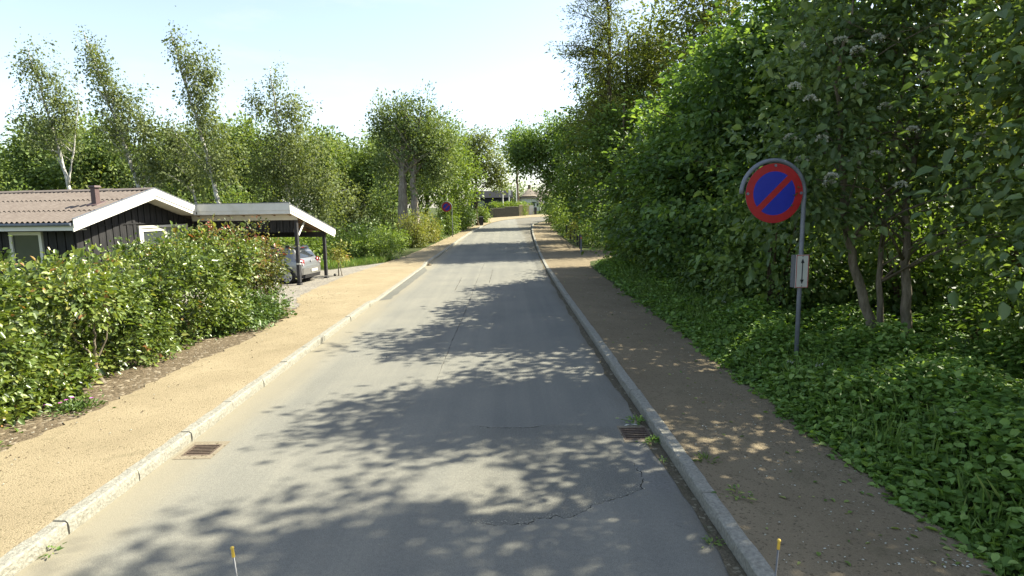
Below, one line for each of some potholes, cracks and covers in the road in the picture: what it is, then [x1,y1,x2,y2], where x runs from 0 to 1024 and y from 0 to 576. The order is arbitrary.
drain grate [617,425,652,442]
drain grate [173,441,230,459]
crack [473,461,644,526]
